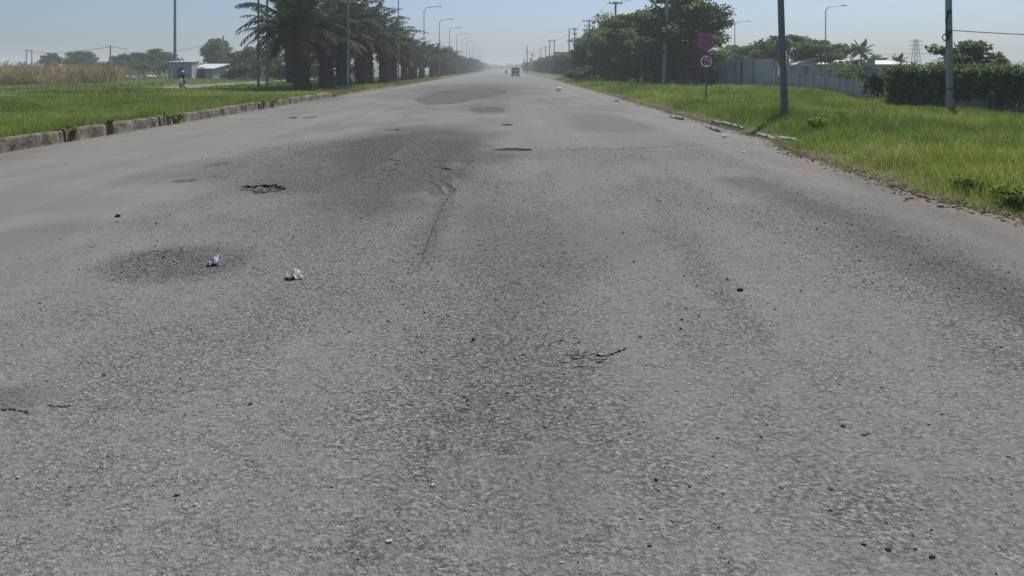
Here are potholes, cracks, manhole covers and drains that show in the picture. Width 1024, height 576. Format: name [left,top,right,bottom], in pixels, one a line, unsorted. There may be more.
crack [418,188,456,269]
crack [1,405,76,414]
pothole [241,184,286,194]
